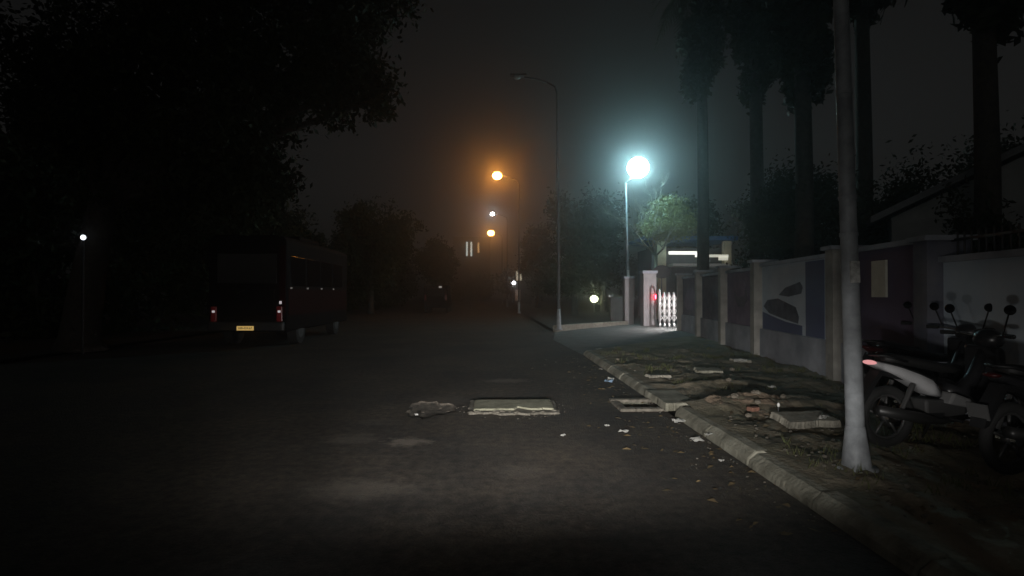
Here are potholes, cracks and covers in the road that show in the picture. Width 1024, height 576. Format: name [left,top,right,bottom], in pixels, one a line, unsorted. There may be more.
manhole cover [467,399,560,416]
drain grate [609,390,693,412]
